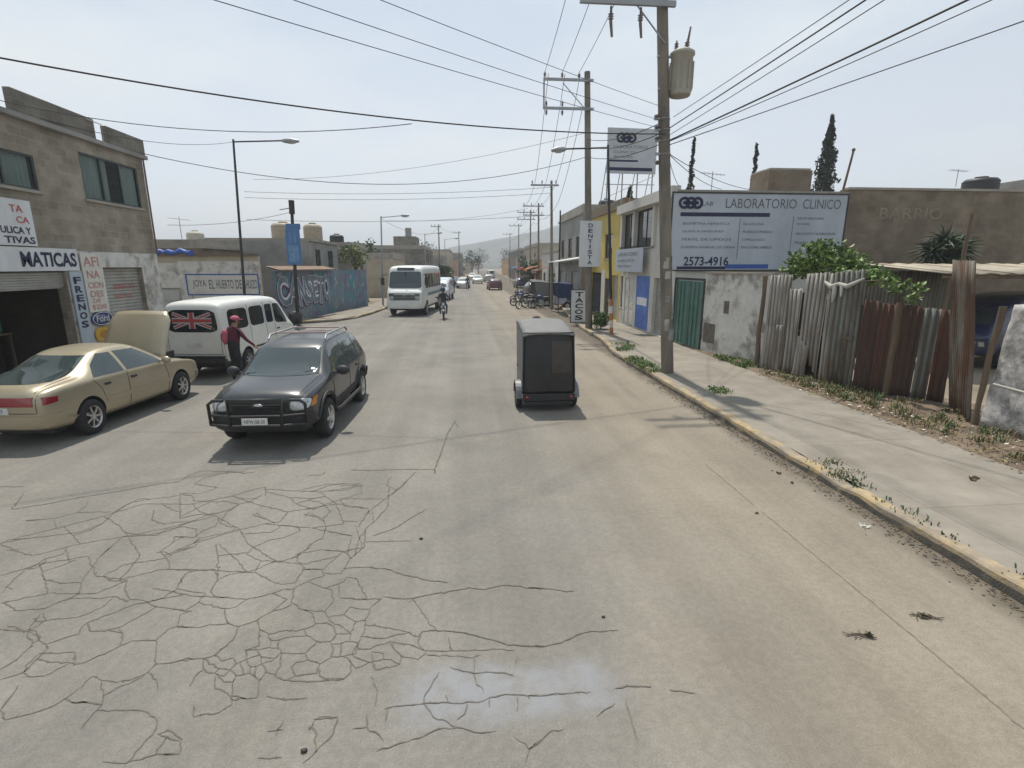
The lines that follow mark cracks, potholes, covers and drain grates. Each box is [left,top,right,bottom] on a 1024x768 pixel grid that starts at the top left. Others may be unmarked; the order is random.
crack [0,471,695,763]
